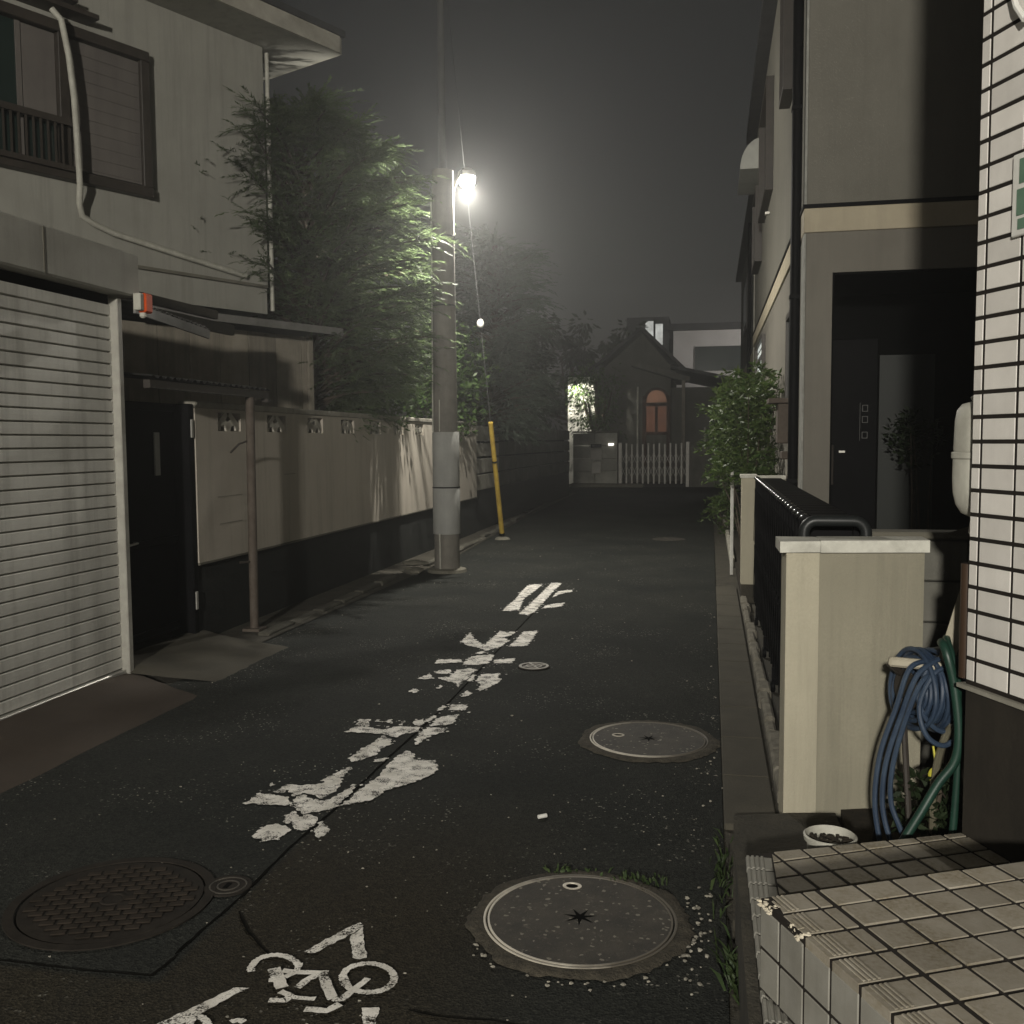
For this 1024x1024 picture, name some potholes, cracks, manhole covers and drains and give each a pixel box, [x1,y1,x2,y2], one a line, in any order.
manhole cover [2,857,216,952]
manhole cover [464,870,696,982]
manhole cover [204,875,252,897]
manhole cover [578,720,721,763]
crack [238,911,269,954]
manhole cover [518,662,550,671]
